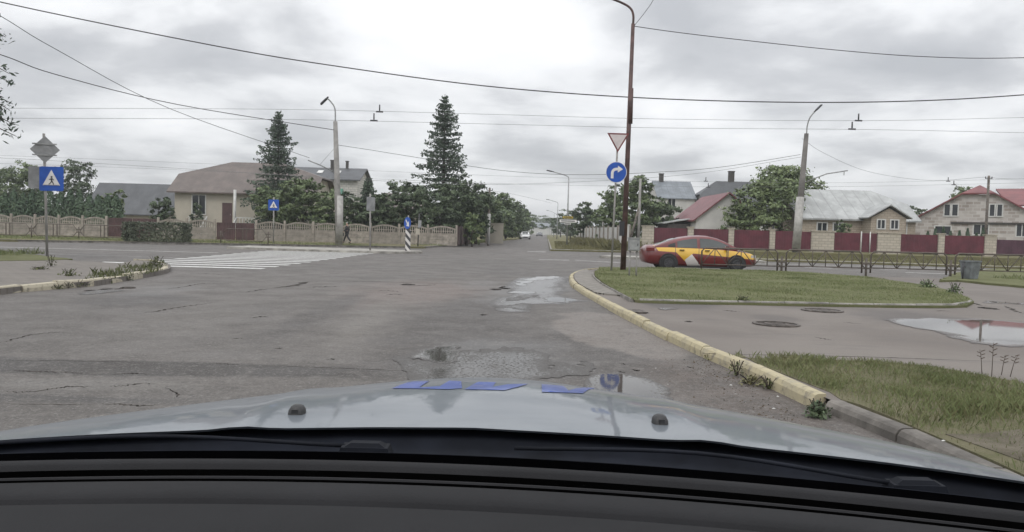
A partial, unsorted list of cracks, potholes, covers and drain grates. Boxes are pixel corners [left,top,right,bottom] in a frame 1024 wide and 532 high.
crack [5,360,180,407]
crack [247,282,336,292]
